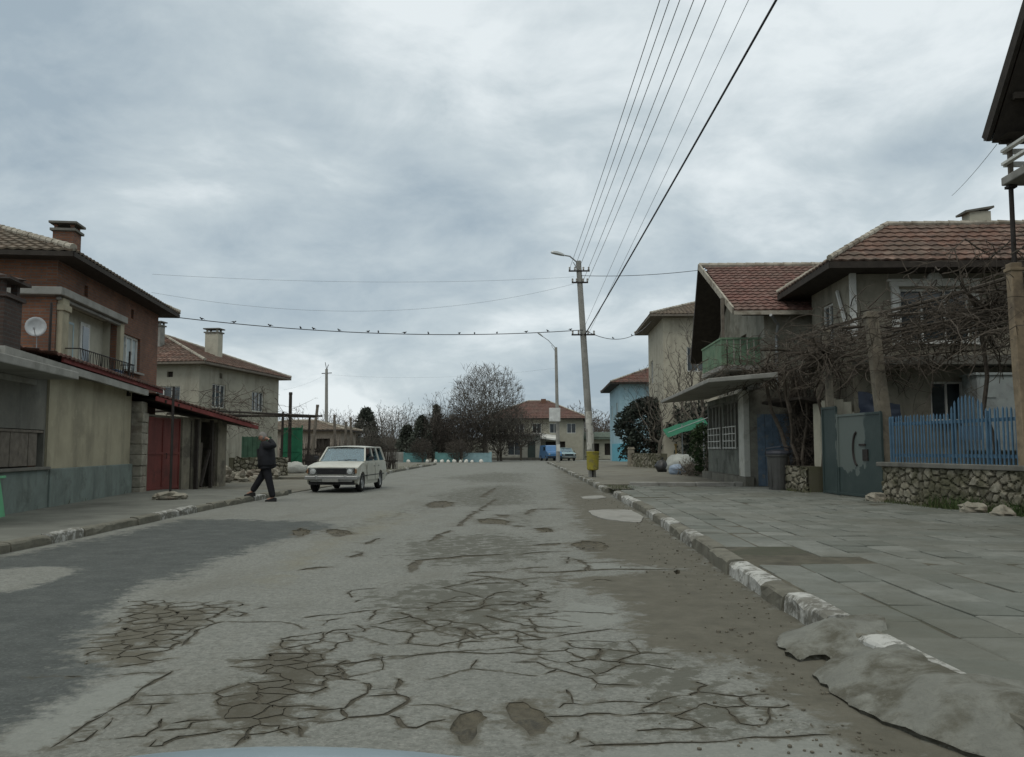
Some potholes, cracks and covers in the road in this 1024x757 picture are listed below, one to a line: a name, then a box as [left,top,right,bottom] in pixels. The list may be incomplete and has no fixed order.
pothole [450,710,487,744]
pothole [326,529,352,537]
pothole [506,702,552,736]
pothole [571,541,609,552]
crack [86,509,788,747]
